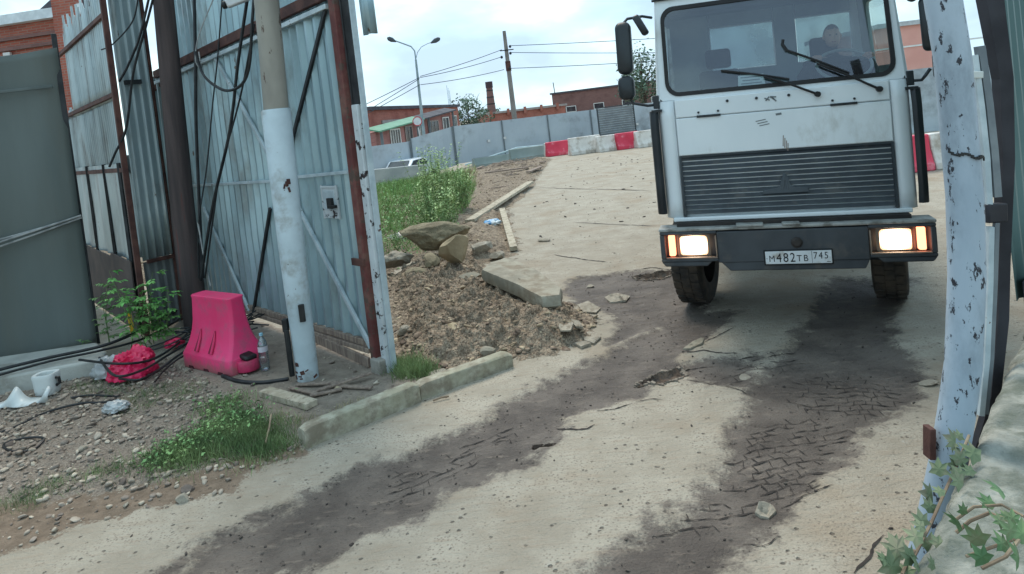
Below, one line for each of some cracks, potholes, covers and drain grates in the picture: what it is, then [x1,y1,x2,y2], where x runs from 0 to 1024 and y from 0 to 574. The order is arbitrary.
crack [380,428,518,504]
pothole [634,366,690,388]
pothole [631,269,672,281]
crack [854,535,883,573]
crack [655,419,856,537]
crack [557,398,656,430]
crack [683,328,927,420]
